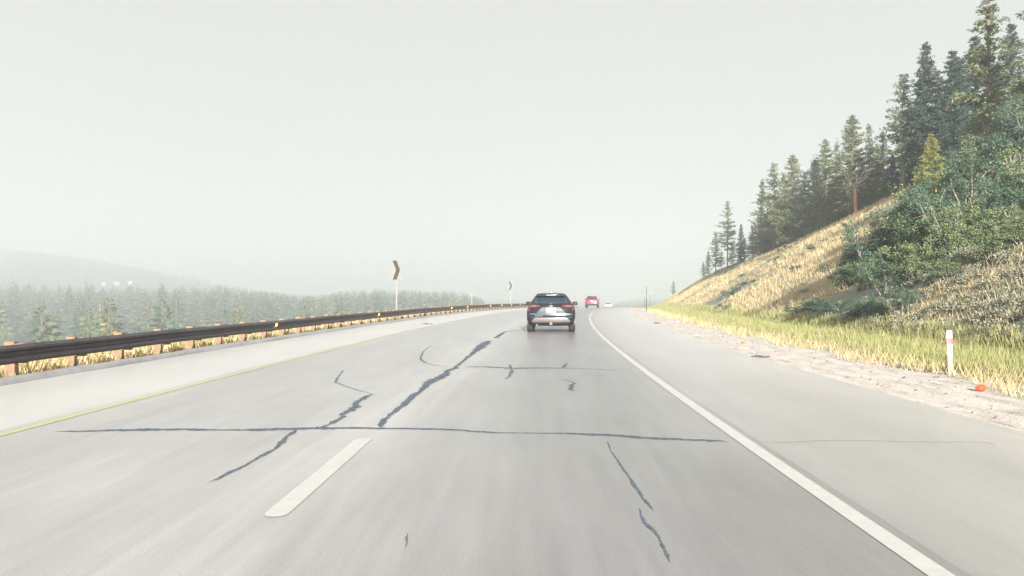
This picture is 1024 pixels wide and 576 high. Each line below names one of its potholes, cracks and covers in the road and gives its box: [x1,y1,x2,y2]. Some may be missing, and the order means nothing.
crack [53,331,728,562]
